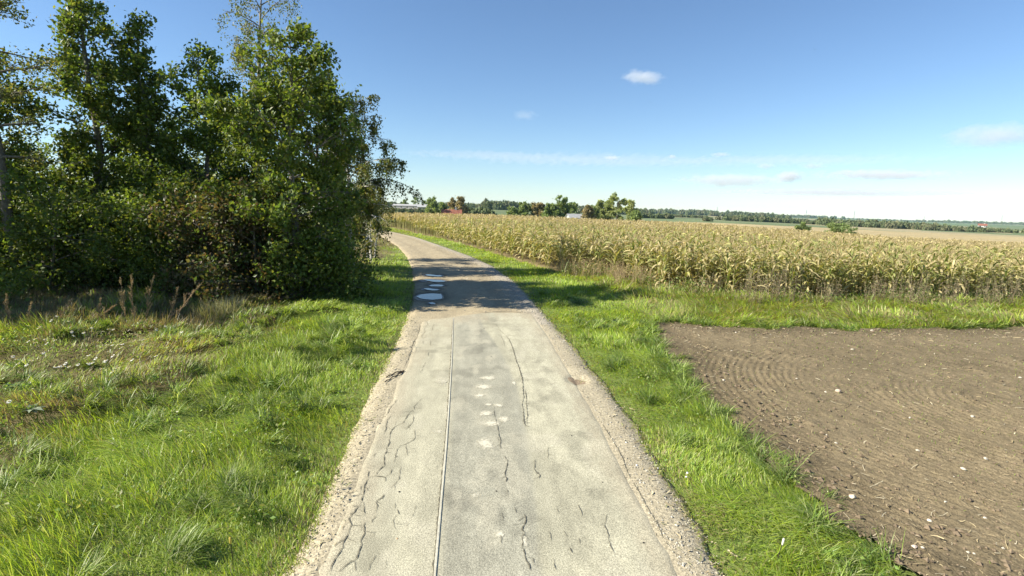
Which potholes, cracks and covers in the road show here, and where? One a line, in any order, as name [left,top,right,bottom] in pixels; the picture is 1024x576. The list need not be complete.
crack [490,408,534,569]
crack [520,373,530,426]
crack [330,399,421,570]
pothole [414,293,444,301]
